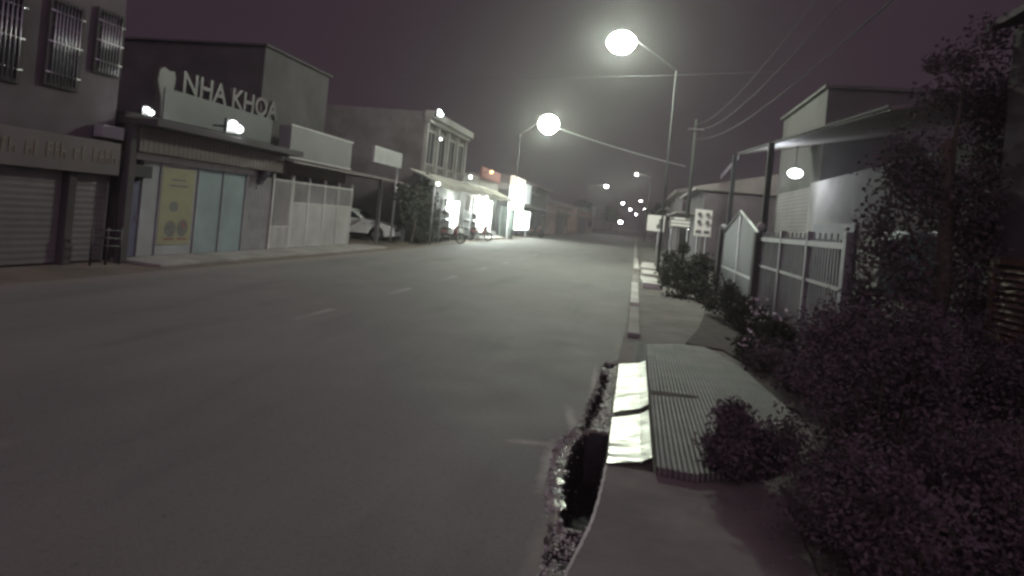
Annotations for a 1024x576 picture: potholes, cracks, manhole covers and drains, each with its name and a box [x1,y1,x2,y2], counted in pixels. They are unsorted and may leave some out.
pothole [601,360,618,374]
pothole [536,515,587,576]
pothole [544,424,609,532]
